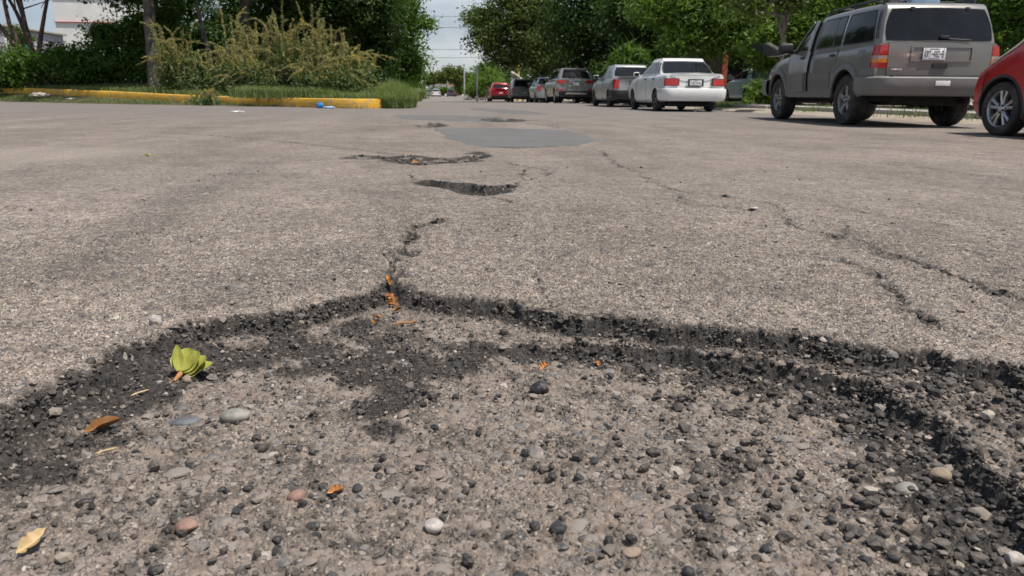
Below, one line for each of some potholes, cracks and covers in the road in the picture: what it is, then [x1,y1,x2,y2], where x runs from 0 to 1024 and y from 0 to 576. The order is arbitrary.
pothole [414,180,516,196]
pothole [0,281,1024,576]
pothole [347,152,489,165]
crack [346,149,1024,330]
